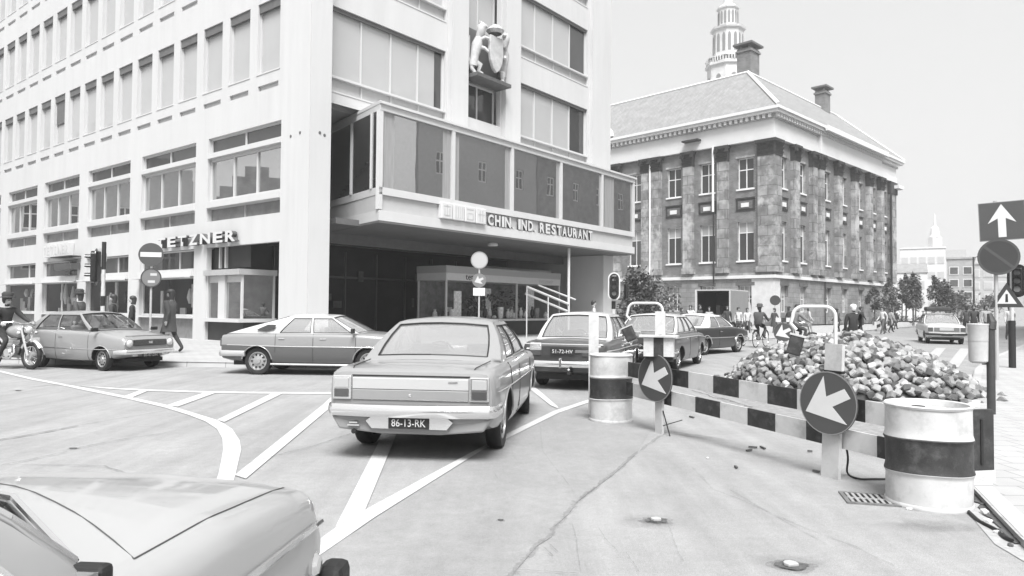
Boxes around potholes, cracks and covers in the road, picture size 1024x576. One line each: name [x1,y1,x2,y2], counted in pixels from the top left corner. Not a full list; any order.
drain grate [838,491,902,507]
